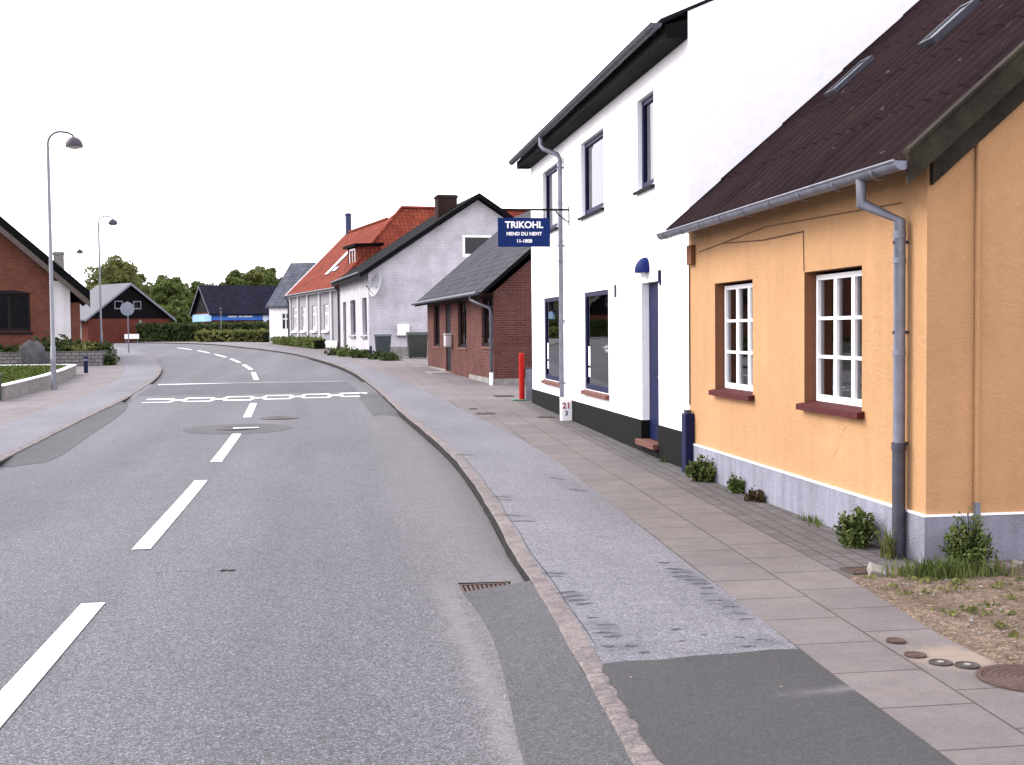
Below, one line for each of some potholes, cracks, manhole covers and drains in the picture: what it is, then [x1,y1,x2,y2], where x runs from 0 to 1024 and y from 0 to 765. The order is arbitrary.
utility cover [840,566,889,575]
manhole cover [928,659,953,667]
manhole cover [904,651,927,659]
manhole cover [955,661,980,670]
drain grate [458,581,511,592]
manhole cover [976,664,1024,692]
